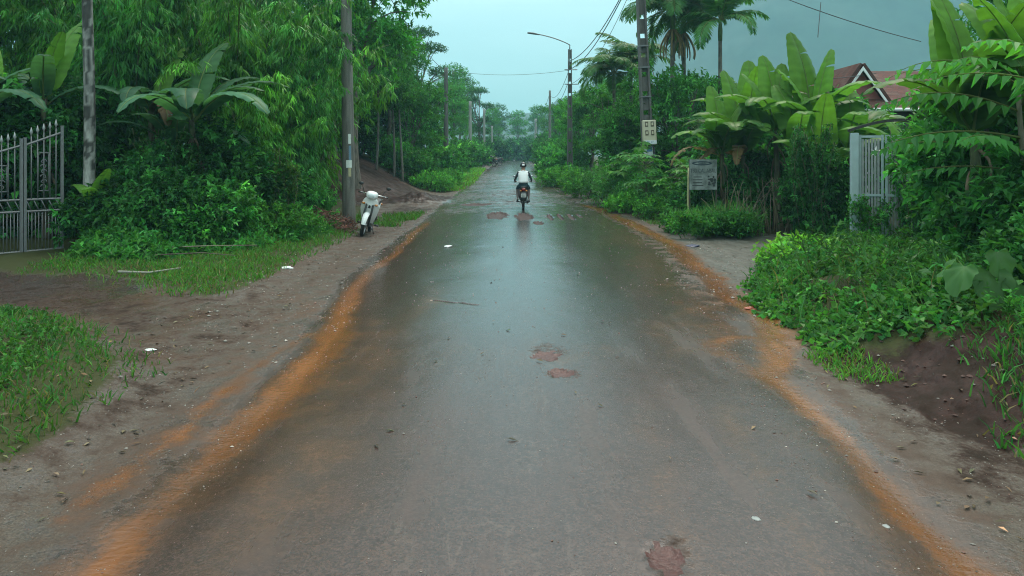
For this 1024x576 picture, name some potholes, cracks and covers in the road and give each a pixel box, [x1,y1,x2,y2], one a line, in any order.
pothole [645,541,685,576]
pothole [487,211,510,220]
pothole [514,213,535,221]
pothole [547,368,575,378]
pothole [530,351,563,362]
